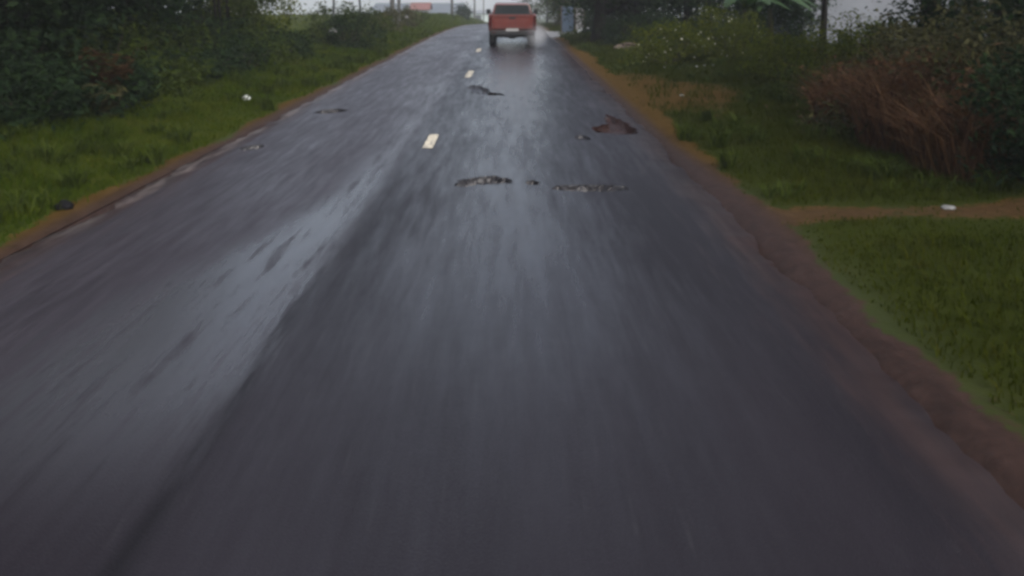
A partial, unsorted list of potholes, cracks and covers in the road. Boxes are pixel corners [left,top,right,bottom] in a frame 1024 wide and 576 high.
pothole [468,85,504,96]
pothole [454,175,513,187]
pothole [552,184,629,192]
pothole [592,114,638,135]
